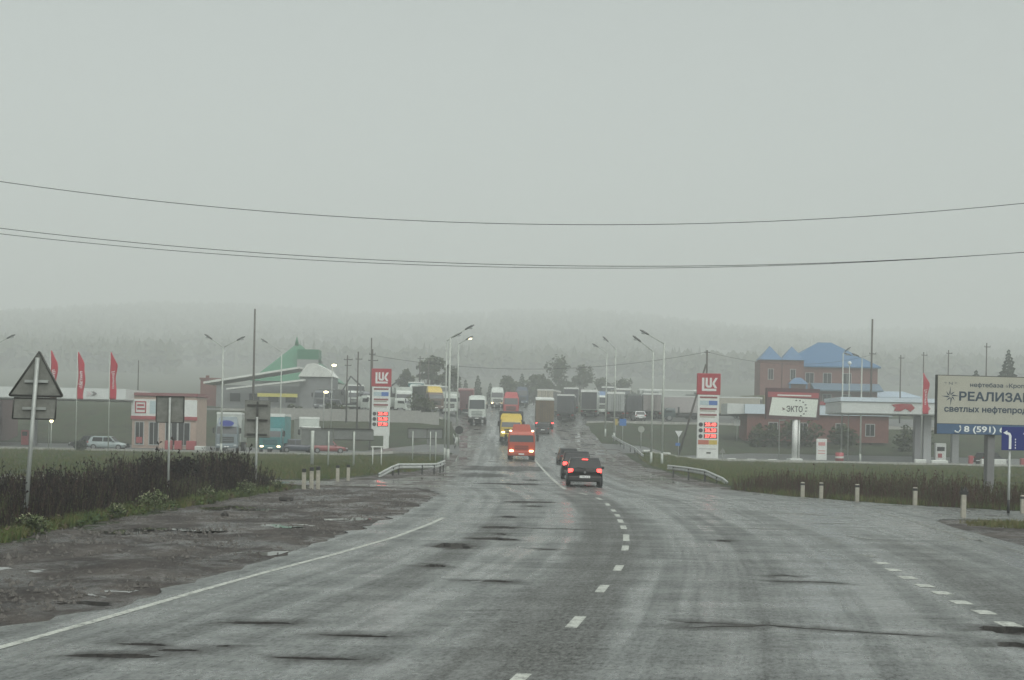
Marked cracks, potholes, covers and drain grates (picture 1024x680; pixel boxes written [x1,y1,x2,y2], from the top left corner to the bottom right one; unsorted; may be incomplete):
crack [677,621,937,637]
pothole [979,626,1024,635]
